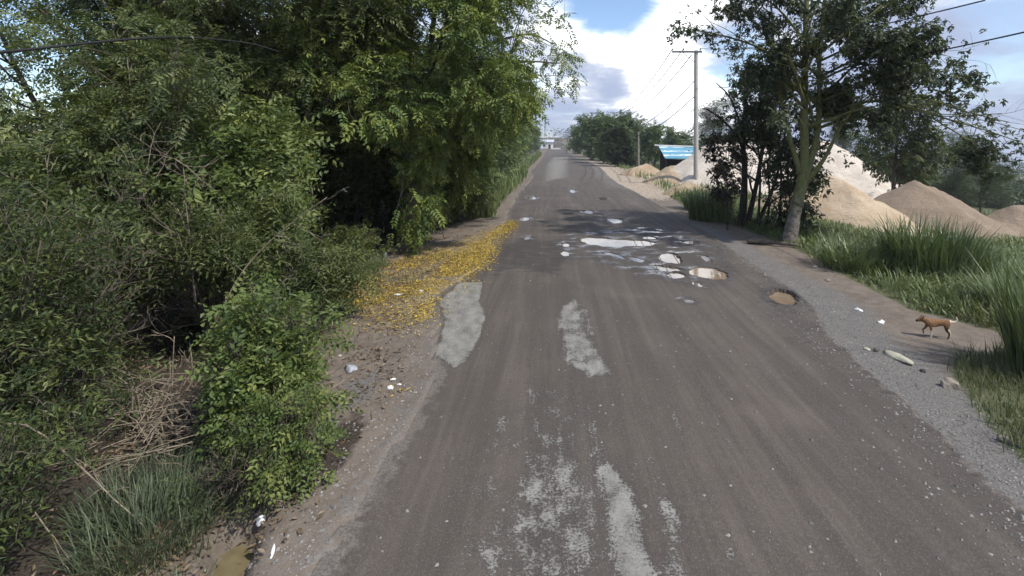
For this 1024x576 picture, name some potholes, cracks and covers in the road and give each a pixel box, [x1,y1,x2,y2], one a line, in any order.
pothole [579,236,656,247]
pothole [766,288,800,305]
pothole [688,267,729,280]
pothole [658,252,683,264]
